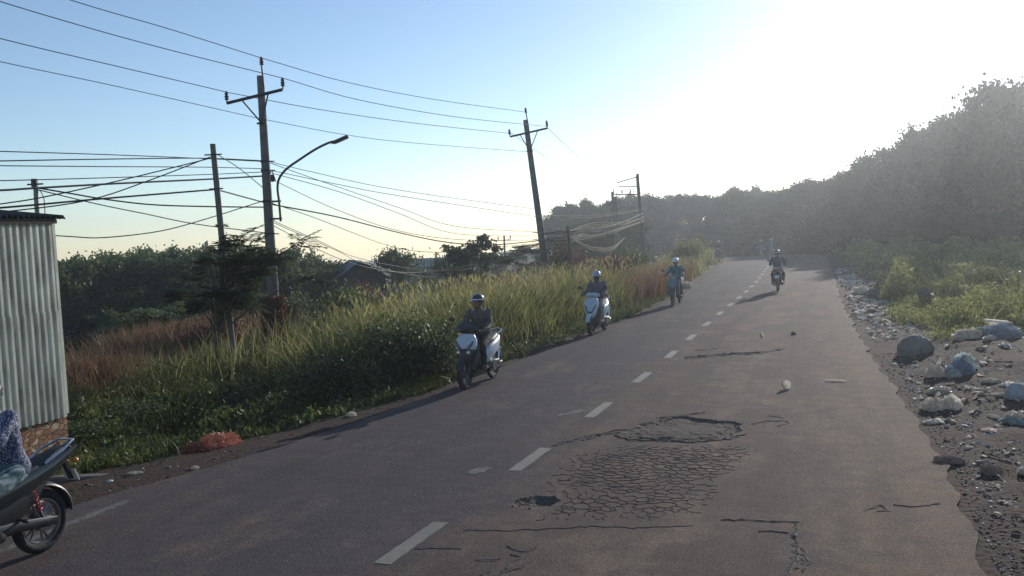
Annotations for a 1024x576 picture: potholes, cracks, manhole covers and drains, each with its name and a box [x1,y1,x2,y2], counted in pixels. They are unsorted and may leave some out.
crack [415,546,537,576]
crack [543,412,791,520]
pothole [510,495,562,509]
crack [721,518,813,576]
pothole [619,415,743,442]
crack [864,502,940,512]
